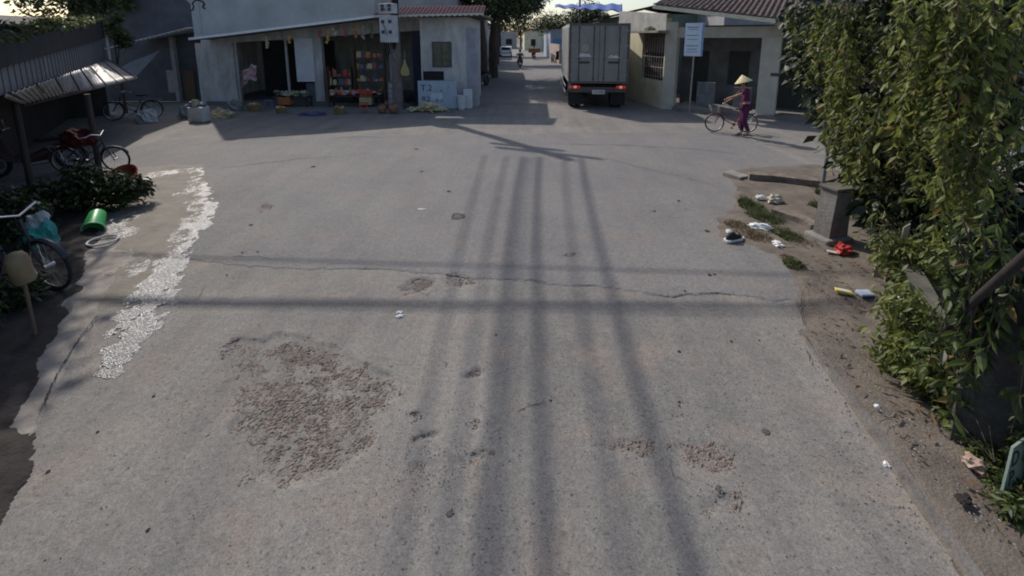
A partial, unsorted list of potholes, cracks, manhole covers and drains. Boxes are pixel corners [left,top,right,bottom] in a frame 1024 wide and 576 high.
pothole [700,491,747,517]
pothole [399,277,435,297]
pothole [445,272,476,288]
crack [37,307,106,417]
